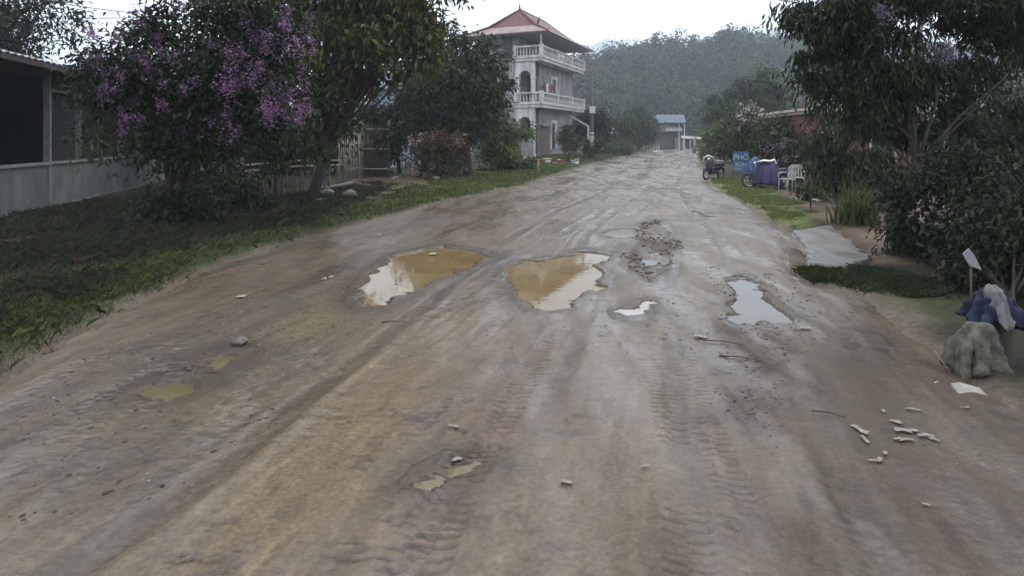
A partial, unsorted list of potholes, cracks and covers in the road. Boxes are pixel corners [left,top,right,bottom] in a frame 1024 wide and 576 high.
pothole [606,298,660,322]
pothole [493,248,622,313]
pothole [722,274,802,328]
pothole [619,219,683,284]
pothole [341,245,498,312]
